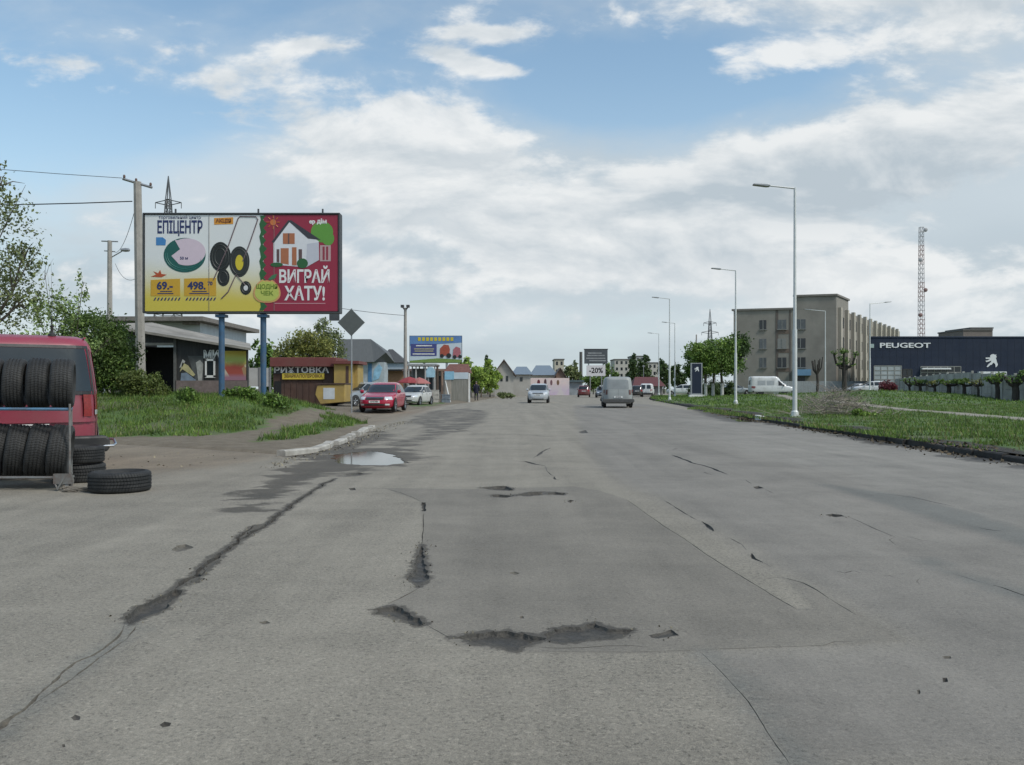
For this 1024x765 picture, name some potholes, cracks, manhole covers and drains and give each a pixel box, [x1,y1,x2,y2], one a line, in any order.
pothole [544,623,633,642]
pothole [649,630,678,639]
pothole [408,544,429,587]
crack [673,448,726,475]
crack [664,500,853,613]
pothole [454,631,546,651]
crack [524,435,557,480]
pothole [375,606,425,626]
